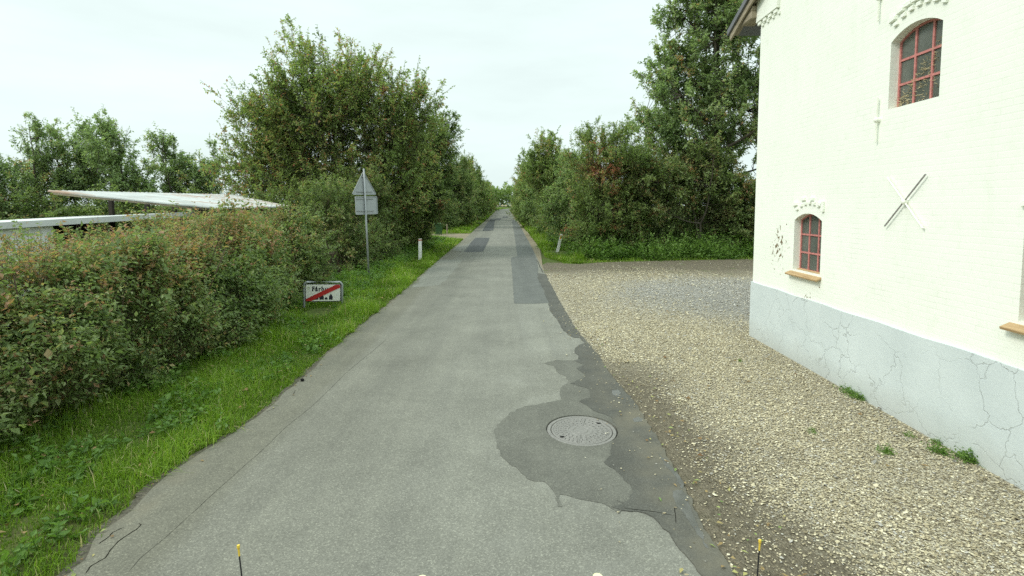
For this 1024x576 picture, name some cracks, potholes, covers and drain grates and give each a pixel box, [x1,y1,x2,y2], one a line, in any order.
manhole cover [546,416,617,446]
